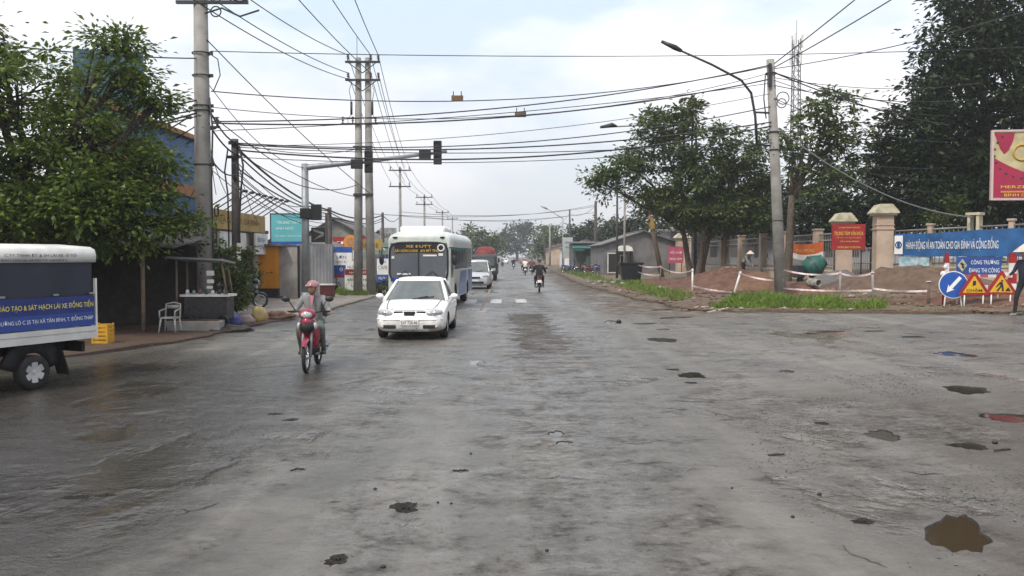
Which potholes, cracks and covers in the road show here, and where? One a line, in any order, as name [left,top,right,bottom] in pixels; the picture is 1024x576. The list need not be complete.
pothole [942,385,992,396]
pothole [323,554,349,567]
pothole [847,517,876,525]
pothole [863,428,901,442]
pothole [924,511,993,557]
pothole [945,442,988,450]
pothole [978,412,1024,425]
pothole [389,499,418,513]
